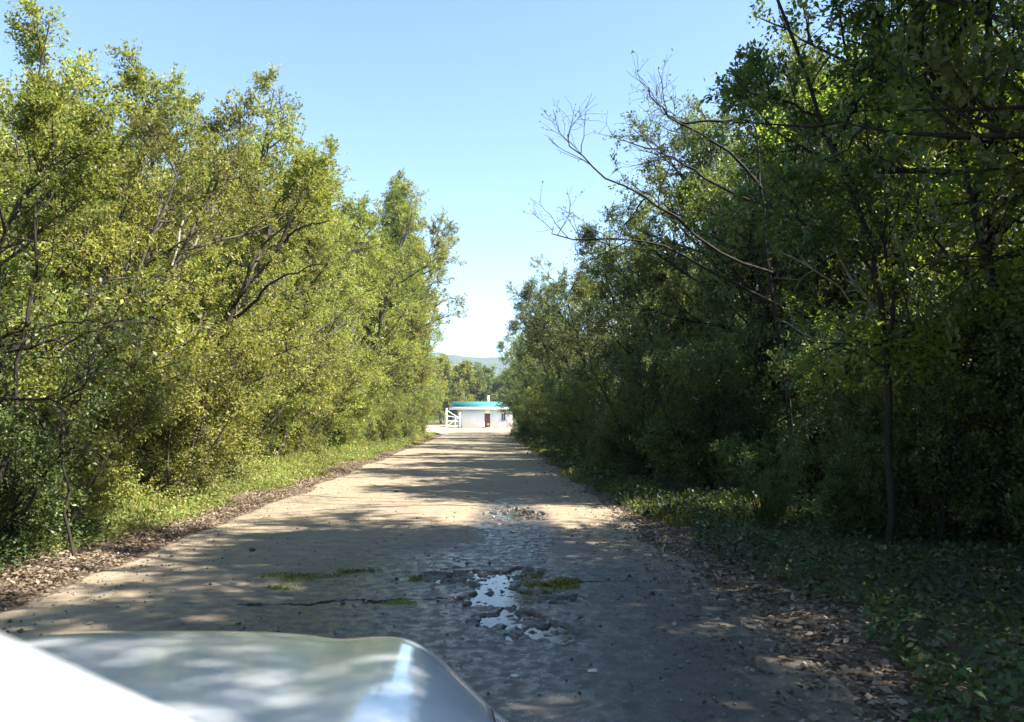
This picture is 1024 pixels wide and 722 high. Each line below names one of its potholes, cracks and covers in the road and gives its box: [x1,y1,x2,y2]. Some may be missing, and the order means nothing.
pothole [503,620,593,643]
crack [236,597,463,607]
pothole [449,586,590,613]
pothole [424,565,568,595]
pothole [472,504,551,527]
pothole [465,607,547,630]
